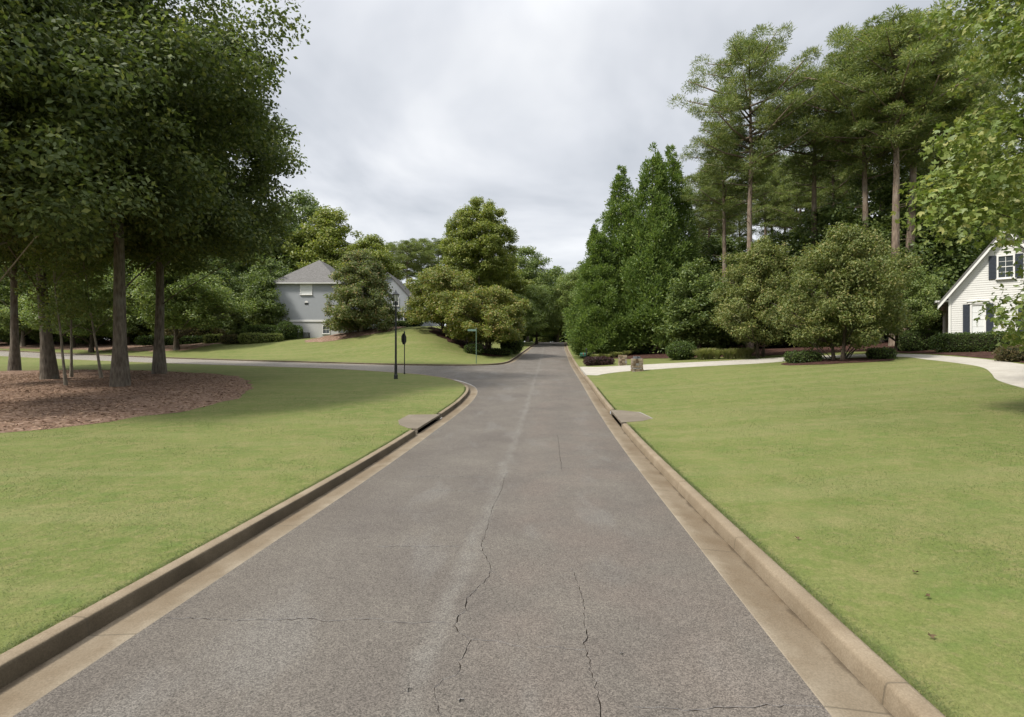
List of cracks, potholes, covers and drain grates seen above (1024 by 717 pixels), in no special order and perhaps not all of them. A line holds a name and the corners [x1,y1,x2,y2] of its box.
crack [548,573,601,717]
drain grate [398,414,440,435]
drain grate [611,410,652,428]
crack [420,473,514,715]
